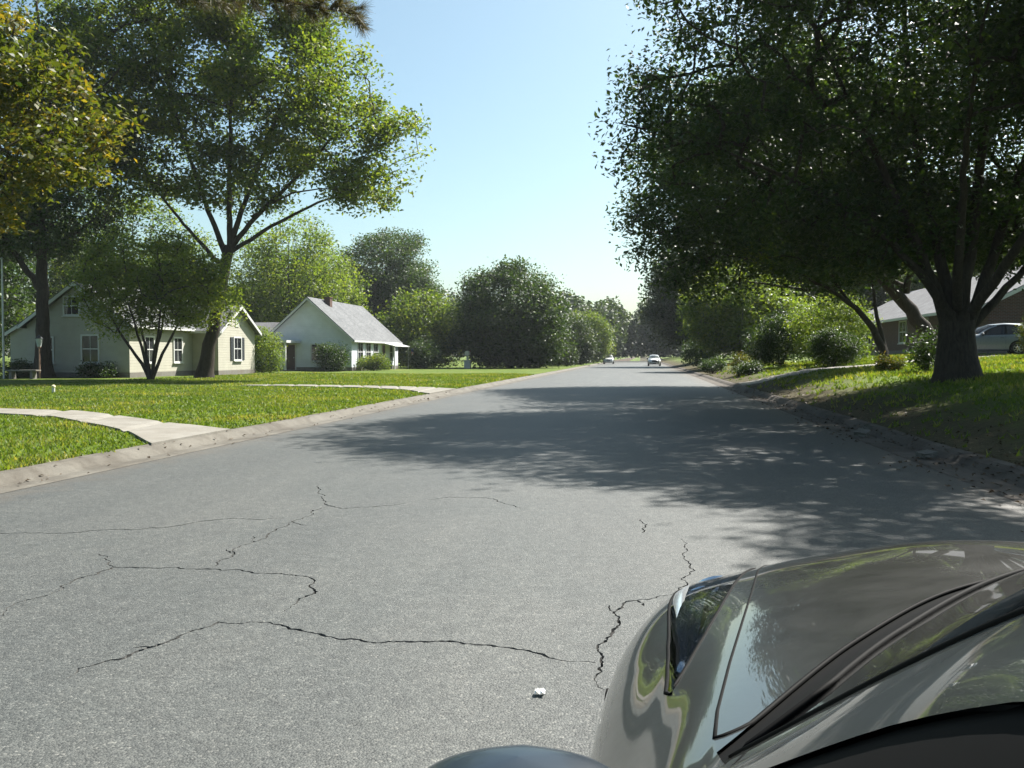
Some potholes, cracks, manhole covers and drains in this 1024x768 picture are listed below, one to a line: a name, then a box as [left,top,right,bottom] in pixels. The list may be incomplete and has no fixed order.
crack [61,541,696,690]
crack [0,487,404,618]
